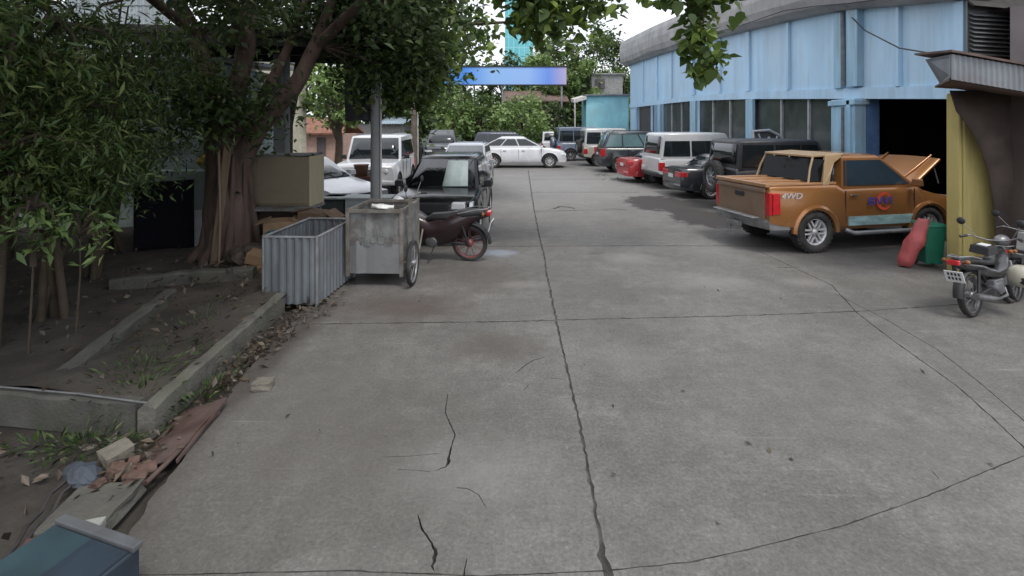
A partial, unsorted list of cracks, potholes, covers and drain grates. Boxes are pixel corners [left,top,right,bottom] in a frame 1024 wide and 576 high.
crack [418,515,438,572]
crack [391,394,456,472]
